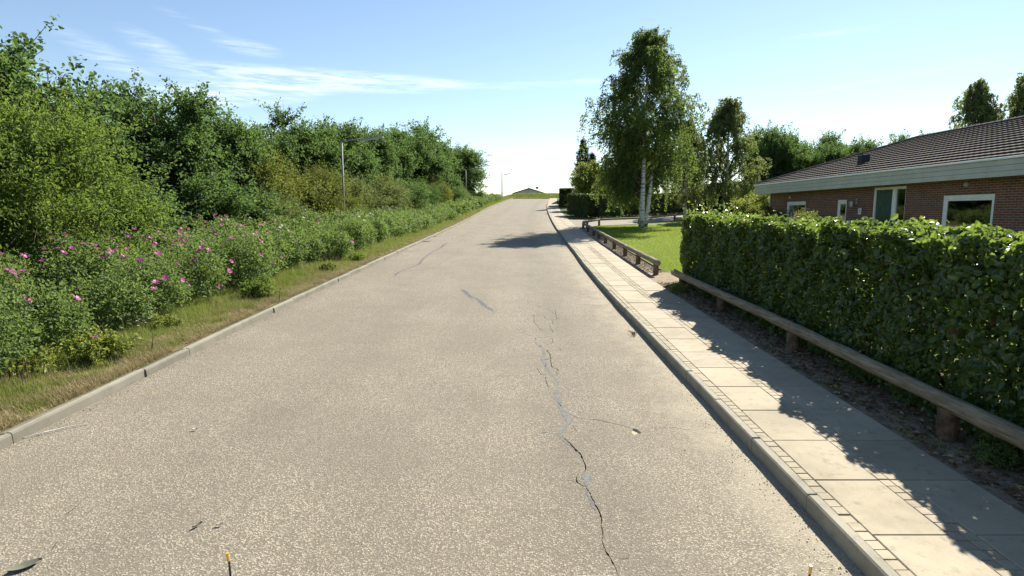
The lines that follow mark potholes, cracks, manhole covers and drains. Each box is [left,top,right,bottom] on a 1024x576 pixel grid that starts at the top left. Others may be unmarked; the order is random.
crack [518,301,720,576]
